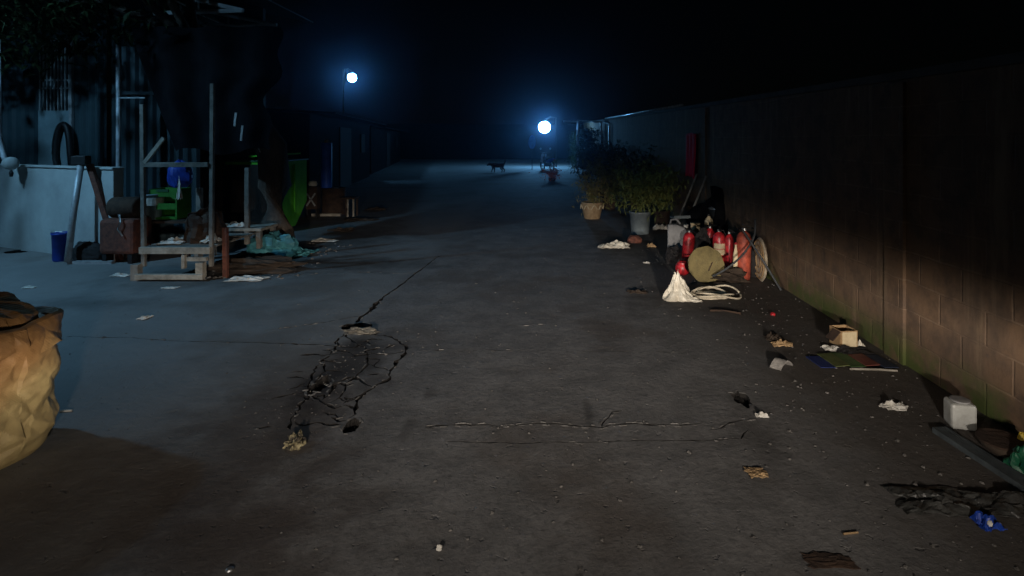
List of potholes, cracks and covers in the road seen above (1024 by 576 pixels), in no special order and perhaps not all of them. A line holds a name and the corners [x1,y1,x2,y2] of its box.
crack [254,257,764,444]
pothole [339,322,375,330]
pothole [339,418,363,435]
